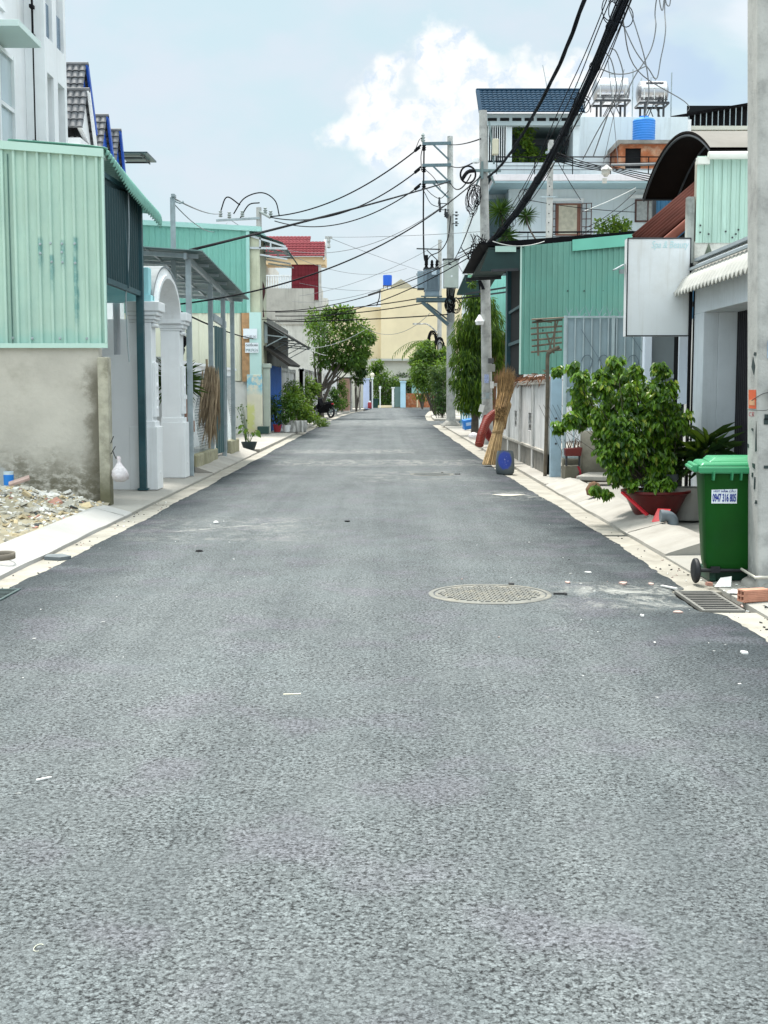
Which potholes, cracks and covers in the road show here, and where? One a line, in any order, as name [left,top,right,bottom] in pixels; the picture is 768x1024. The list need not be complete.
manhole cover [429,582,567,605]
drain grate [674,591,745,613]
